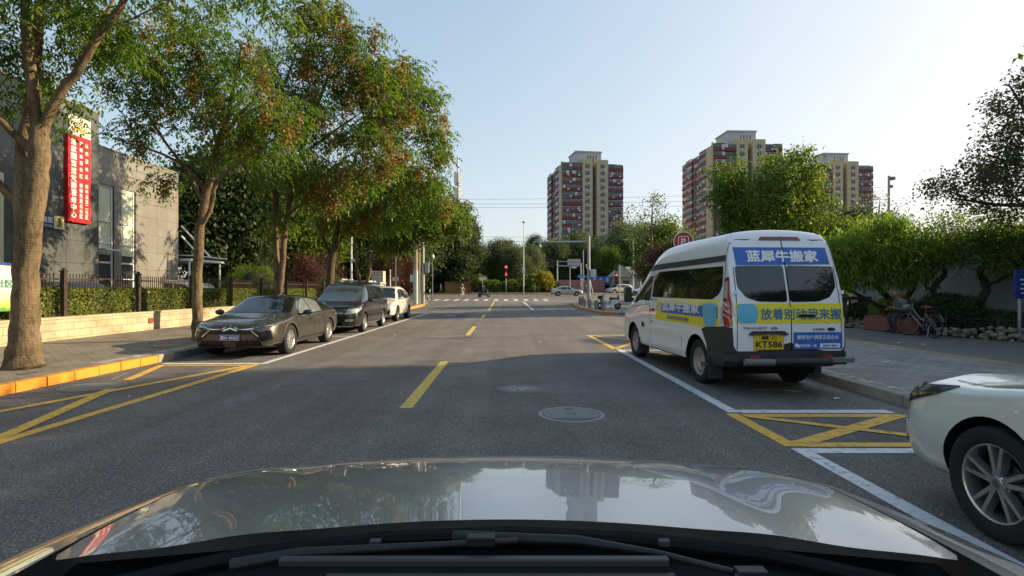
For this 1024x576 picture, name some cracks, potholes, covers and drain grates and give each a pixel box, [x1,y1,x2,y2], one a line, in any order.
manhole cover [538,407,605,423]
